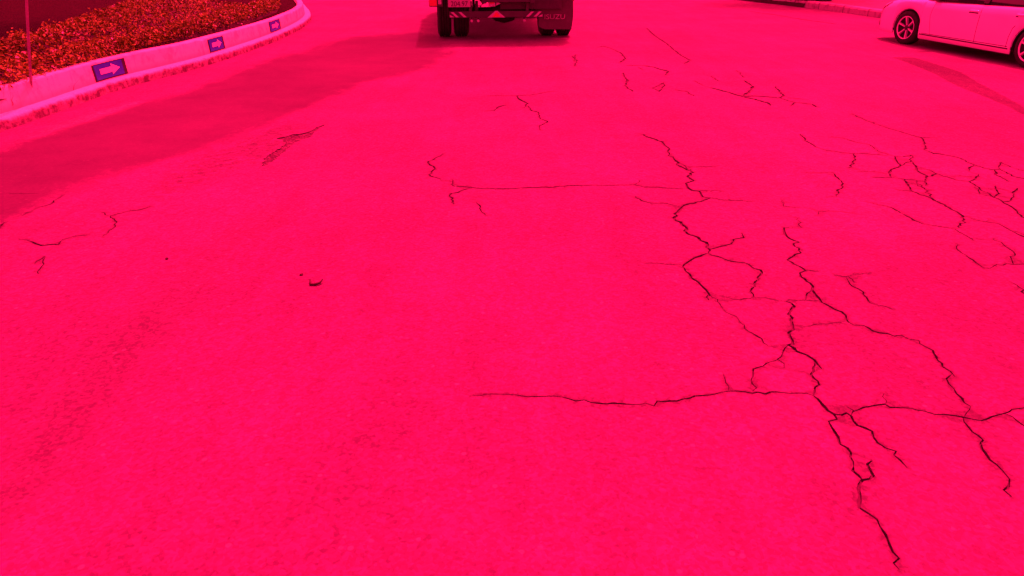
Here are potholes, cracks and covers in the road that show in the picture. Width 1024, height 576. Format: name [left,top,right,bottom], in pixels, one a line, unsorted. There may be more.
crack [600,28,694,96]
crack [427,134,1024,570]
crack [697,70,816,107]
crack [494,91,552,130]
crack [27,235,85,274]
